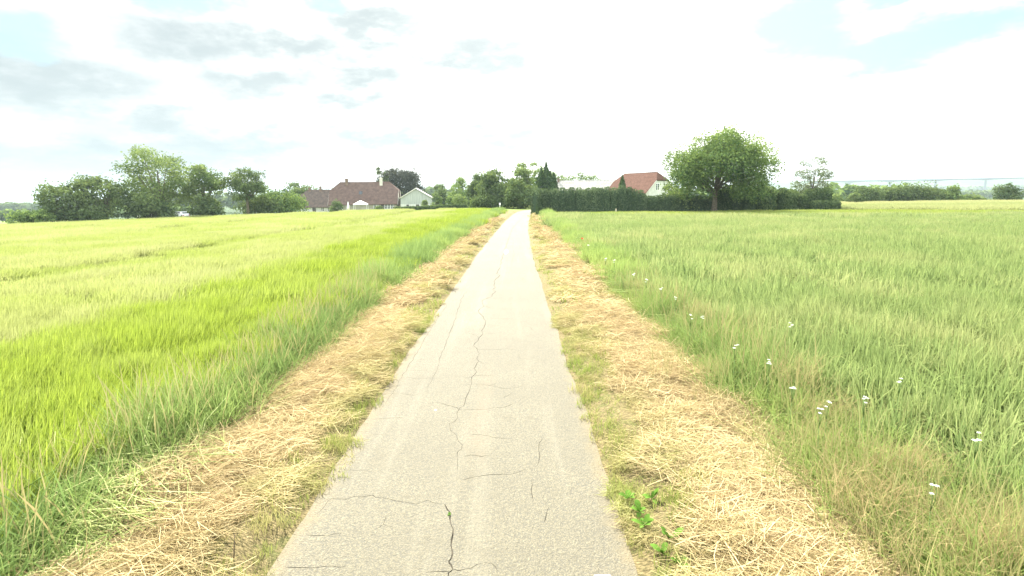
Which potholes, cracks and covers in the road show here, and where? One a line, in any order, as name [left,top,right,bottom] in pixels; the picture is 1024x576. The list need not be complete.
crack [318,495,496,576]
crack [408,216,549,523]
